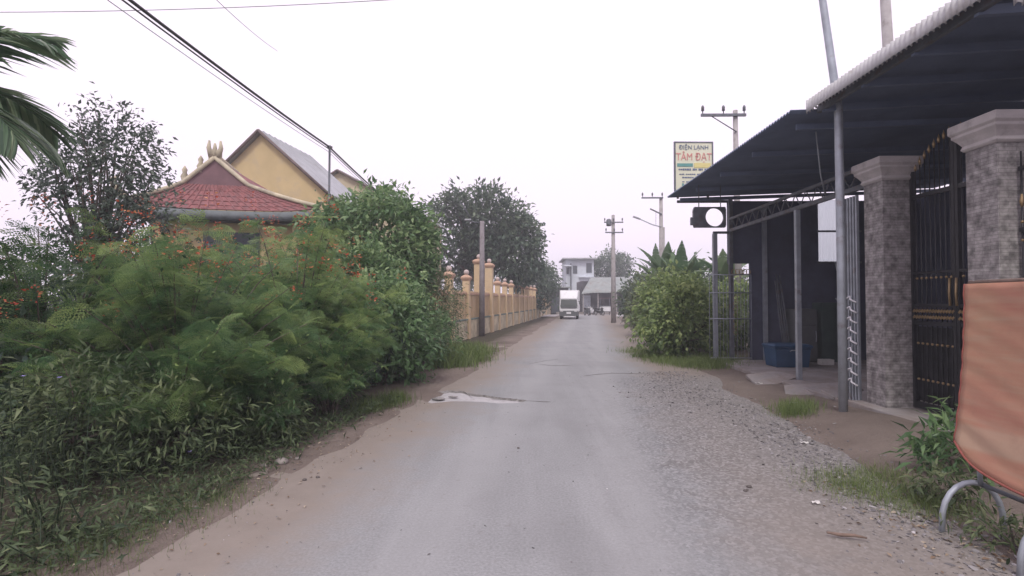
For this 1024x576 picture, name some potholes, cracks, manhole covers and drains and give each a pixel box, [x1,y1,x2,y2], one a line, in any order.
crack [535,359,671,376]
pothole [429,390,526,403]
